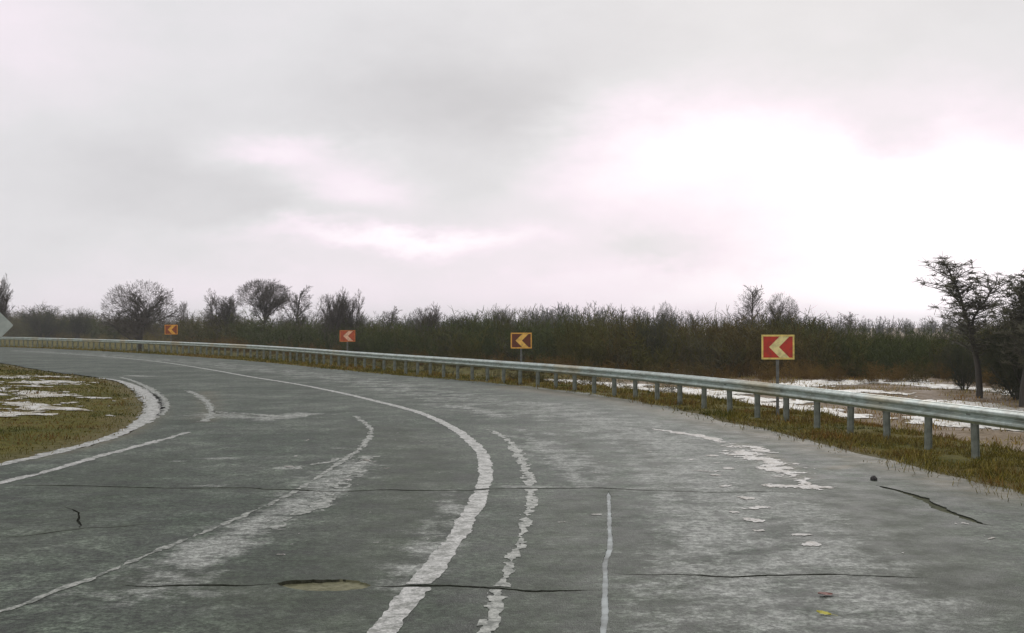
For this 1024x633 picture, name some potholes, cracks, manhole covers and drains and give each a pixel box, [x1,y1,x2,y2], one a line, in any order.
crack [116,584,584,592]
crack [876,485,993,526]
crack [15,485,782,493]
pothole [277,579,371,591]
crack [15,507,145,537]
